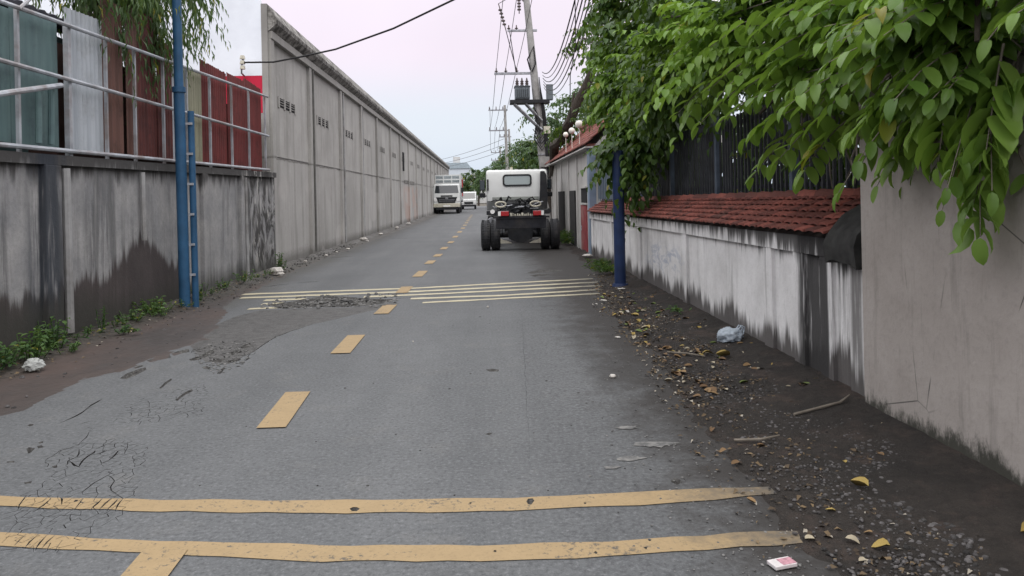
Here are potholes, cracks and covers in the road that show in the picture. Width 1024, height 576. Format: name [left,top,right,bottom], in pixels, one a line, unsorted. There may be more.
pothole [271,296,392,309]
crack [113,325,309,424]
crack [0,400,148,553]
